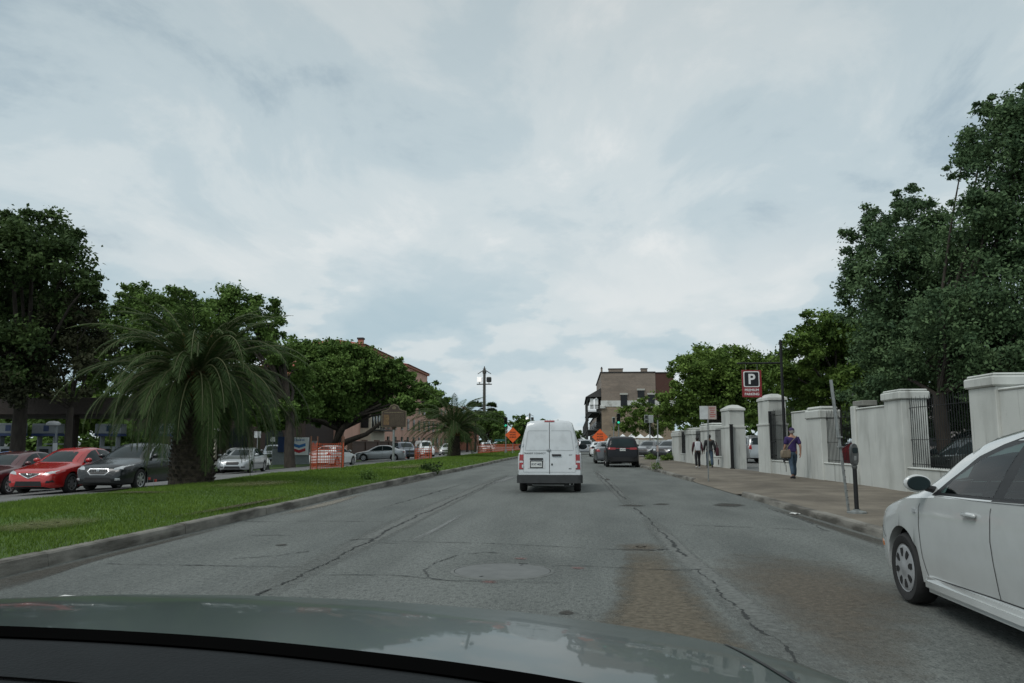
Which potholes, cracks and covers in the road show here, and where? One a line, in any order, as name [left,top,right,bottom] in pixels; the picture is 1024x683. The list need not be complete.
crack [110,474,829,665]
manhole cover [450,563,555,580]
